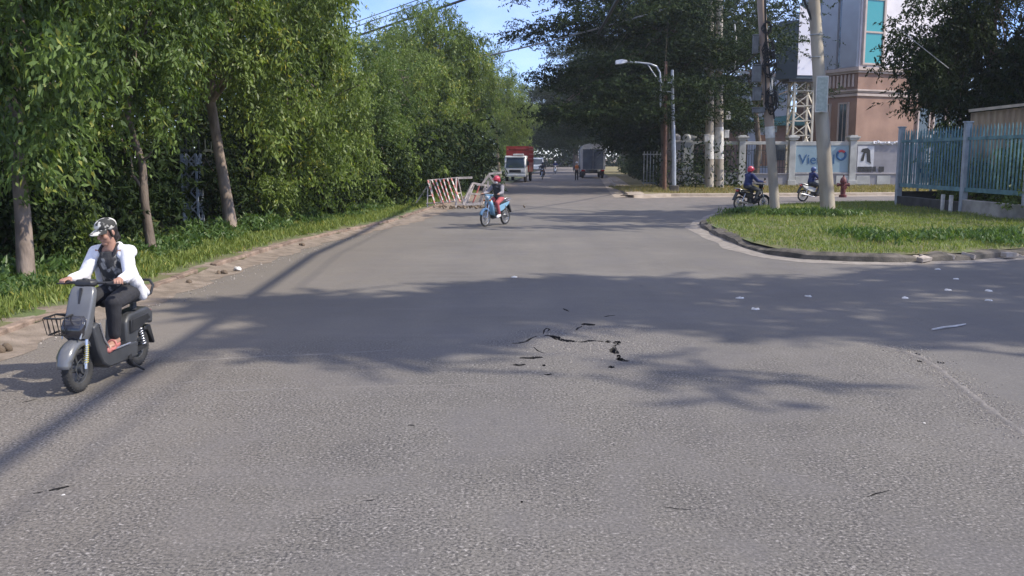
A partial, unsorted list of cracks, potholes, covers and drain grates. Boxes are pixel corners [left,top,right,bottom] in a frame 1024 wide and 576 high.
crack [513,309,628,375]
